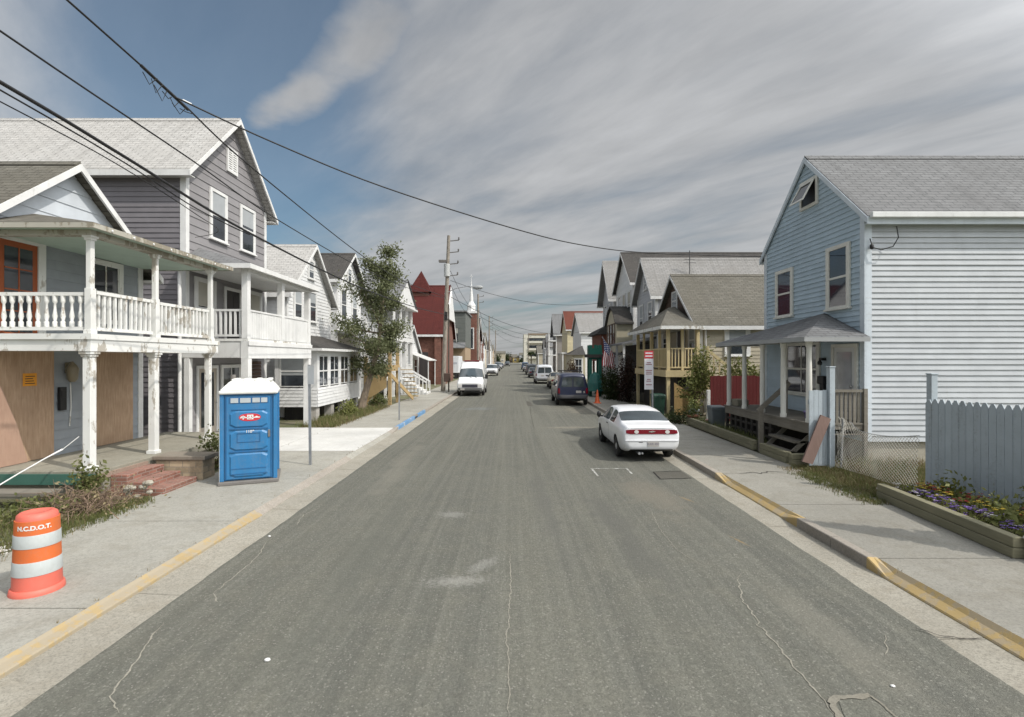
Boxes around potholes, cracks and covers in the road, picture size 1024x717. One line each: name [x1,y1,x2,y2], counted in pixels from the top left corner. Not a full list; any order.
crack [211,541,267,602]
crack [737,574,835,715]
crack [109,622,164,712]
